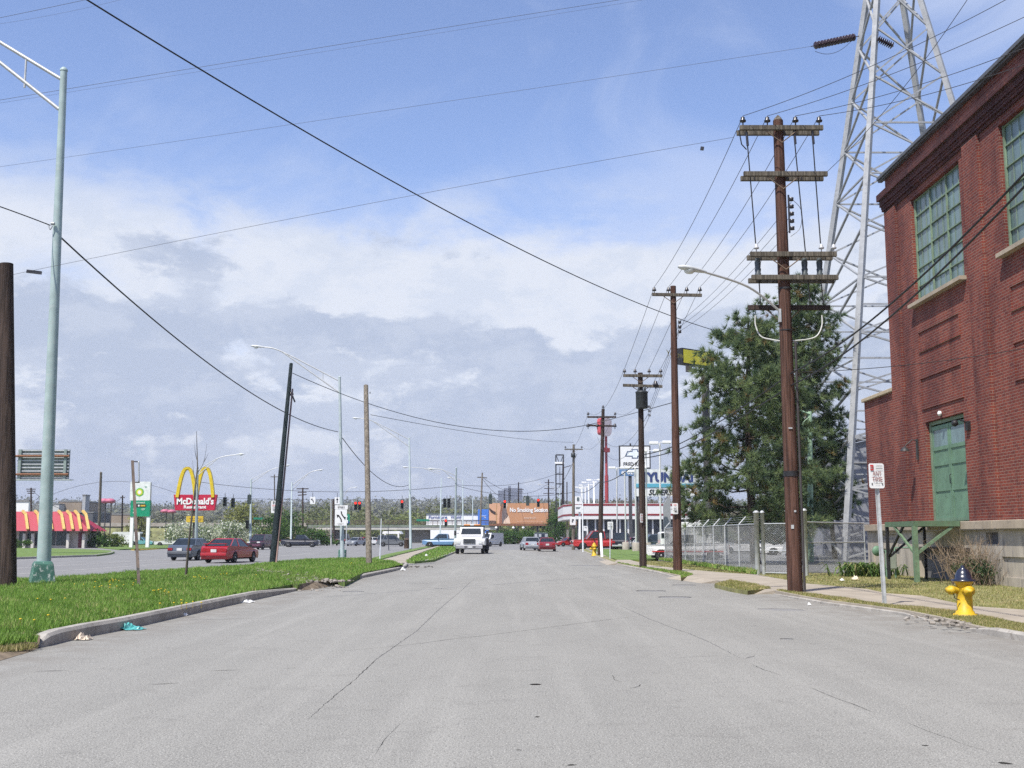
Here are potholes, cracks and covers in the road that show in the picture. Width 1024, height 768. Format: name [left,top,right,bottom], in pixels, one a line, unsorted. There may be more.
crack [311,583,779,717]
